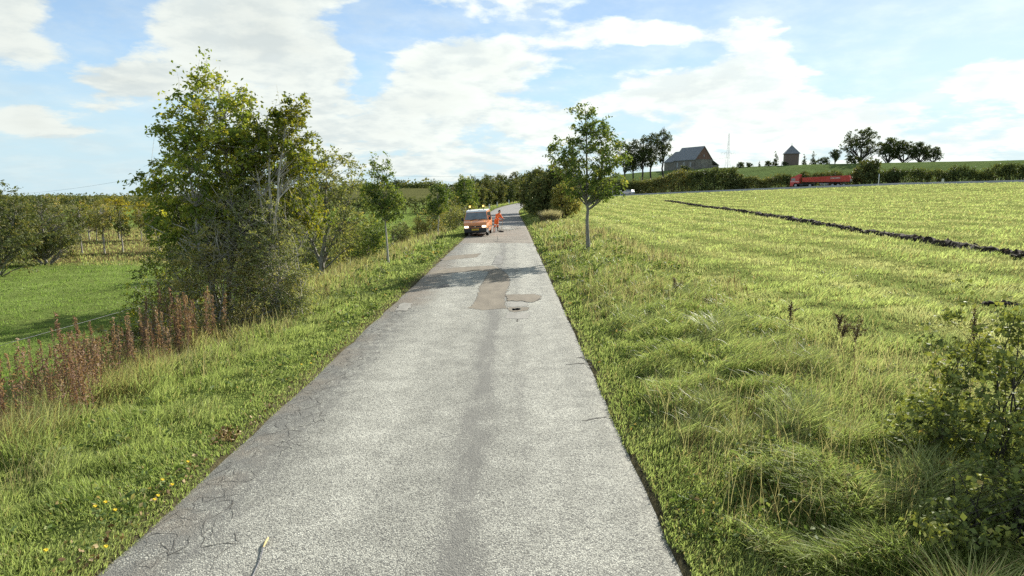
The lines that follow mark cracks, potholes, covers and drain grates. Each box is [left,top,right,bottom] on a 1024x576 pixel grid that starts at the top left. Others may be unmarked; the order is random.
crack [126,302,417,569]
